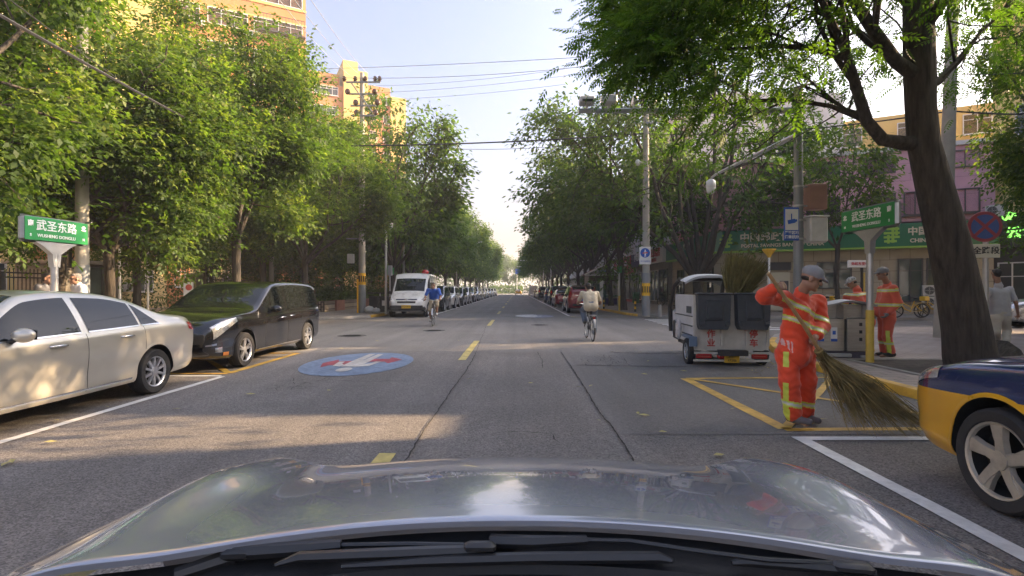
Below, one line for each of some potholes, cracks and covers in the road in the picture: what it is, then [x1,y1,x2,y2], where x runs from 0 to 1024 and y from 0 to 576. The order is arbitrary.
crack [404,330,485,461]
crack [561,352,634,461]
